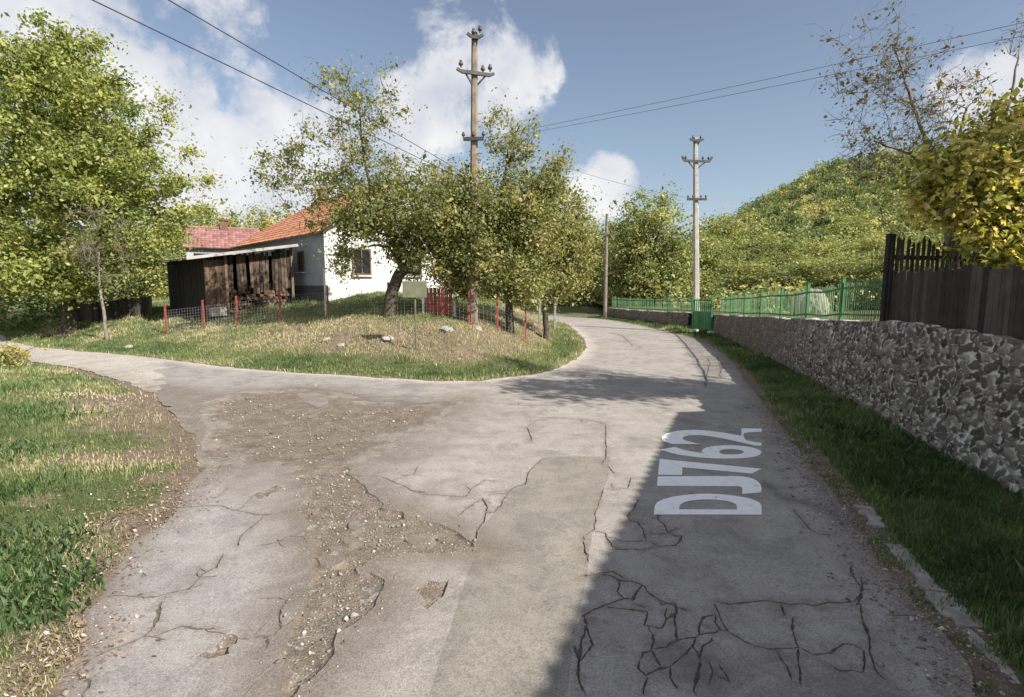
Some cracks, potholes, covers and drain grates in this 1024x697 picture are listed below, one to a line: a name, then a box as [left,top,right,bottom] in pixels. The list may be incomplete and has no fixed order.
pothole [197,388,465,476]
pothole [198,634,238,659]
crack [69,484,304,697]
pothole [279,466,476,697]
crack [704,356,721,387]
crack [353,459,543,538]
pothole [254,486,282,499]
crack [489,394,911,696]
